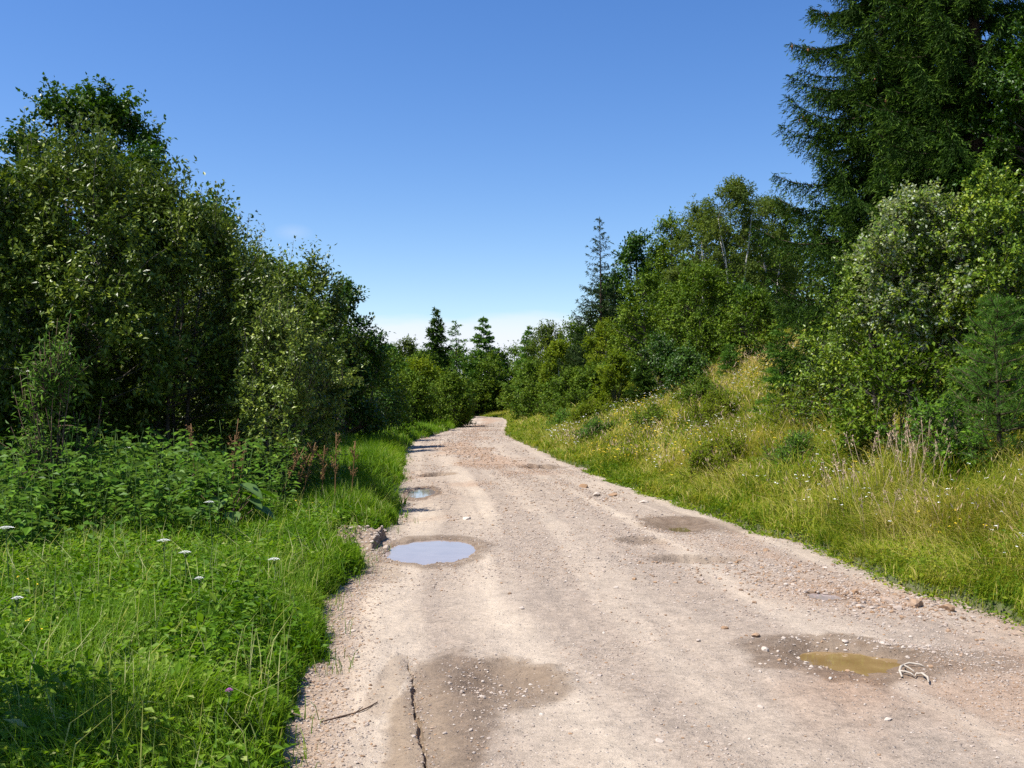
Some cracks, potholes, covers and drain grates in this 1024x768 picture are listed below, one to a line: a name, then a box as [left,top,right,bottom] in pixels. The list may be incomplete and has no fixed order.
pothole [769,639,936,678]
crack [407,660,429,768]
pothole [806,591,843,600]
pothole [613,535,668,545]
pothole [642,517,716,534]
pothole [379,537,480,565]
pothole [407,487,437,498]
pothole [447,656,566,701]
